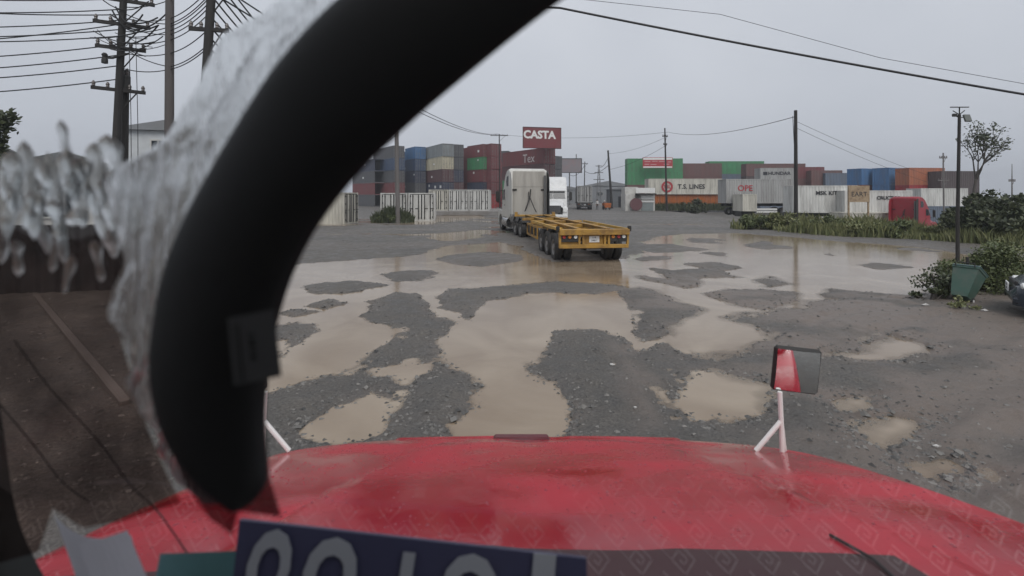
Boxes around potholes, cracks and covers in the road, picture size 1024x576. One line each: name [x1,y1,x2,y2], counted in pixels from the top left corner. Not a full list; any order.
pothole [671,369,778,426]
pothole [370,360,437,382]
pothole [432,295,637,437]
pothole [821,330,935,364]
pothole [905,450,980,487]
pothole [267,308,405,397]
pothole [290,387,399,445]
pothole [840,410,938,456]
pothole [828,389,886,416]
